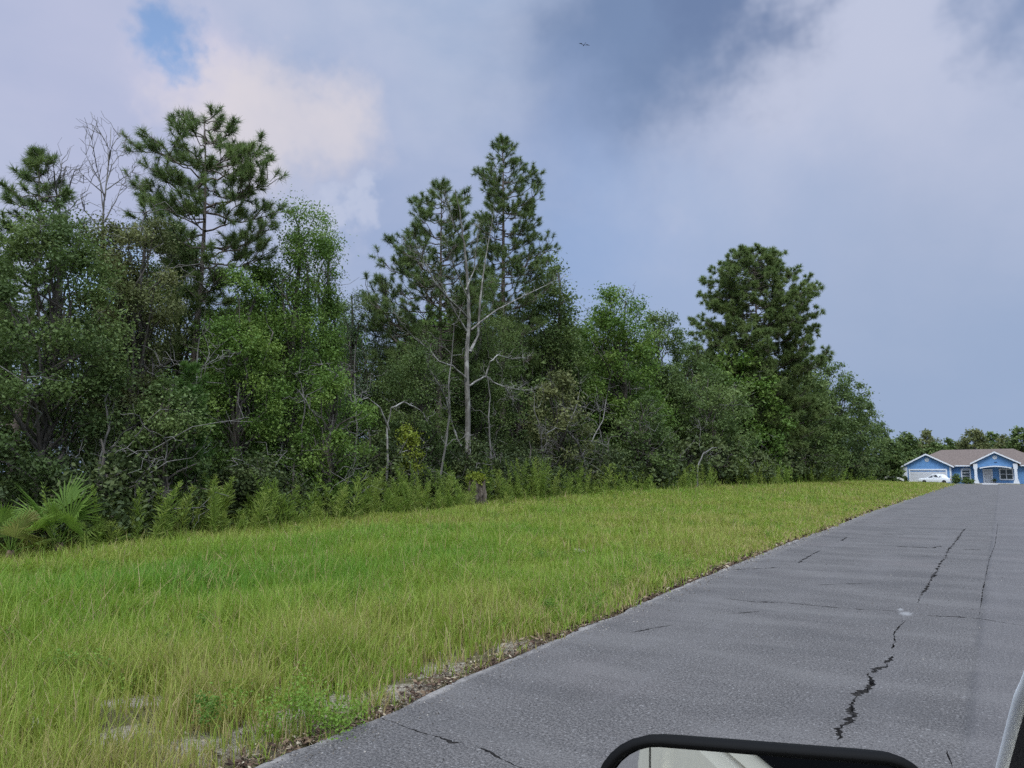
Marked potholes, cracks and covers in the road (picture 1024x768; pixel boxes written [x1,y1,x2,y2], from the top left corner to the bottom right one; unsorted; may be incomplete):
crack [897,529,974,600]
crack [382,718,460,744]
crack [480,748,520,768]
